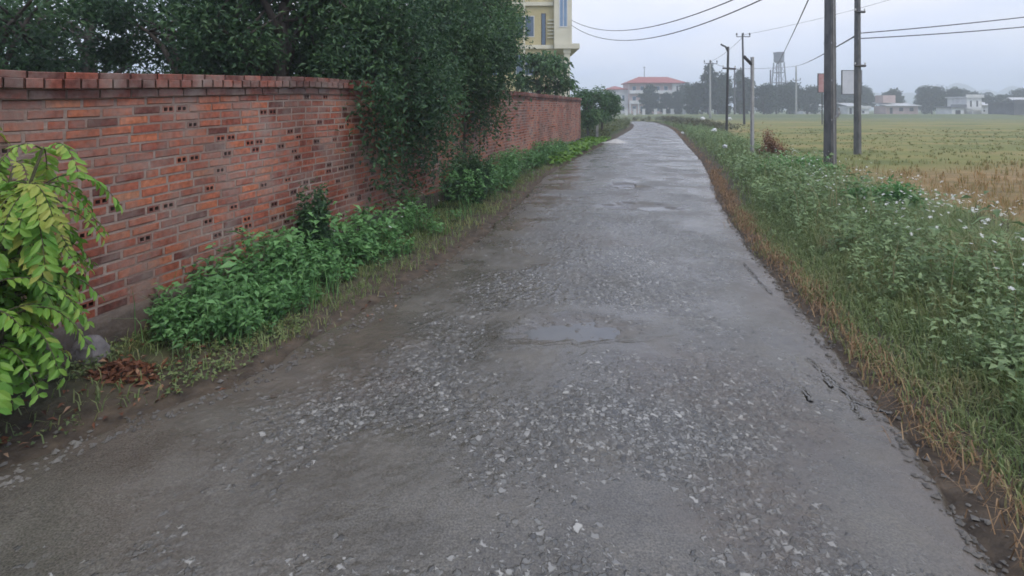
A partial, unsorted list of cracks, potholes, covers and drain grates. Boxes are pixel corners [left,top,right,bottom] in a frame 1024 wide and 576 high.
pothole [597,201,689,213]
pothole [492,310,679,347]
crack [742,263,771,294]
pothole [606,182,655,190]
crack [800,359,892,419]
